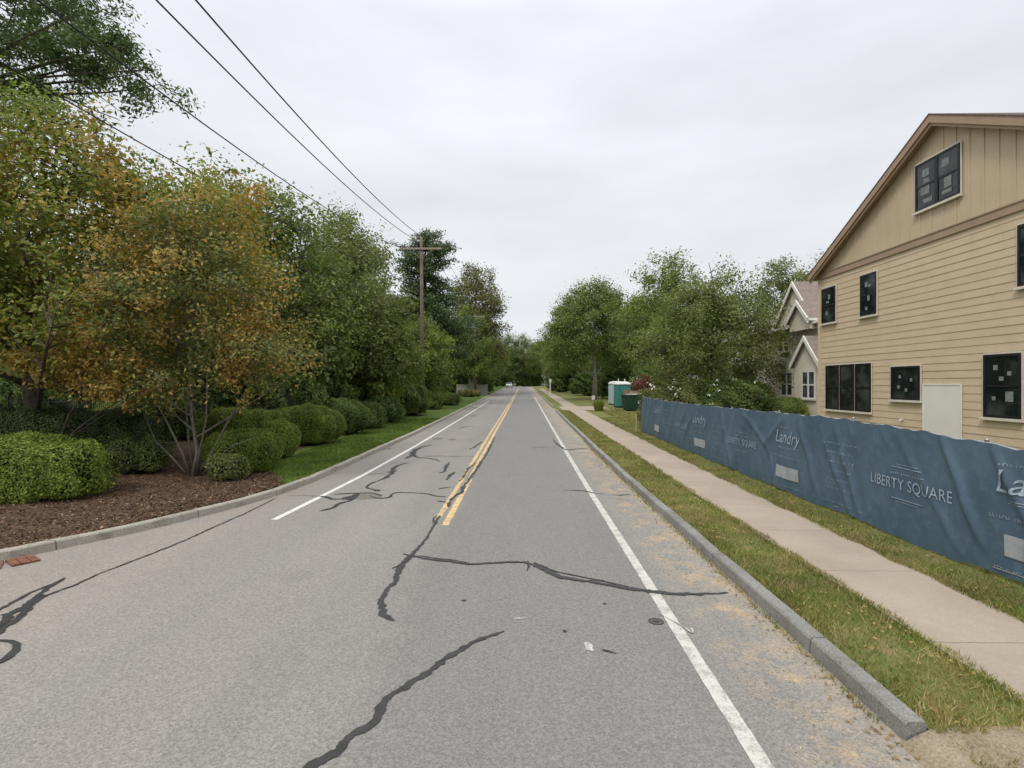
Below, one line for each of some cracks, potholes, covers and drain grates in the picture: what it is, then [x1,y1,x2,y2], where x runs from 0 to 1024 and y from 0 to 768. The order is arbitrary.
crack [393,553,728,595]
